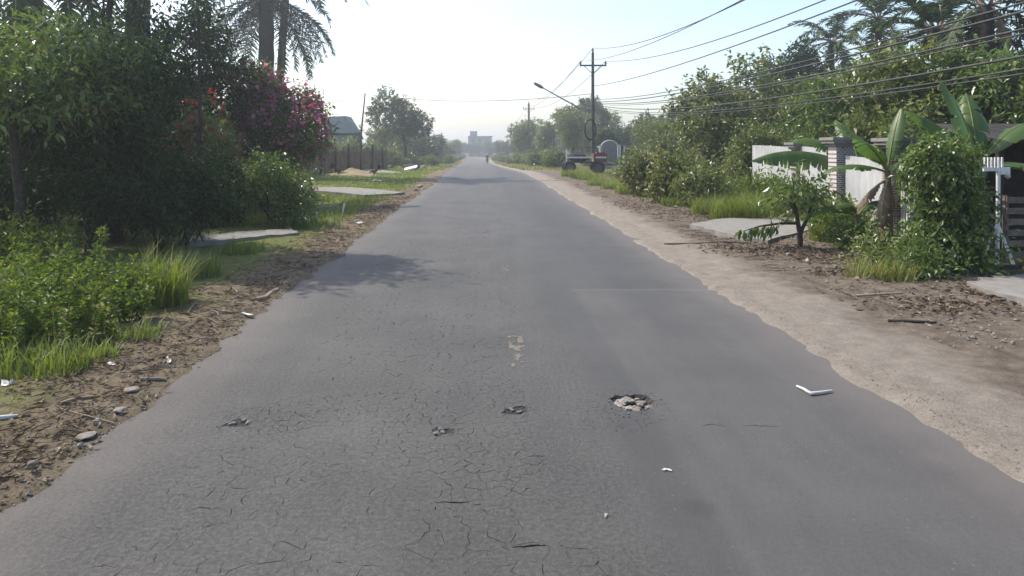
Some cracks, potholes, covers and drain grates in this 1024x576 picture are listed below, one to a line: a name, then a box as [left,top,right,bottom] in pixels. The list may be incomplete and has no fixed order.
pothole [431,425,462,439]
crack [60,519,407,576]
pothole [500,404,535,415]
pothole [592,392,662,418]
crack [583,388,677,431]
pothole [206,416,257,429]
crack [162,357,609,576]
